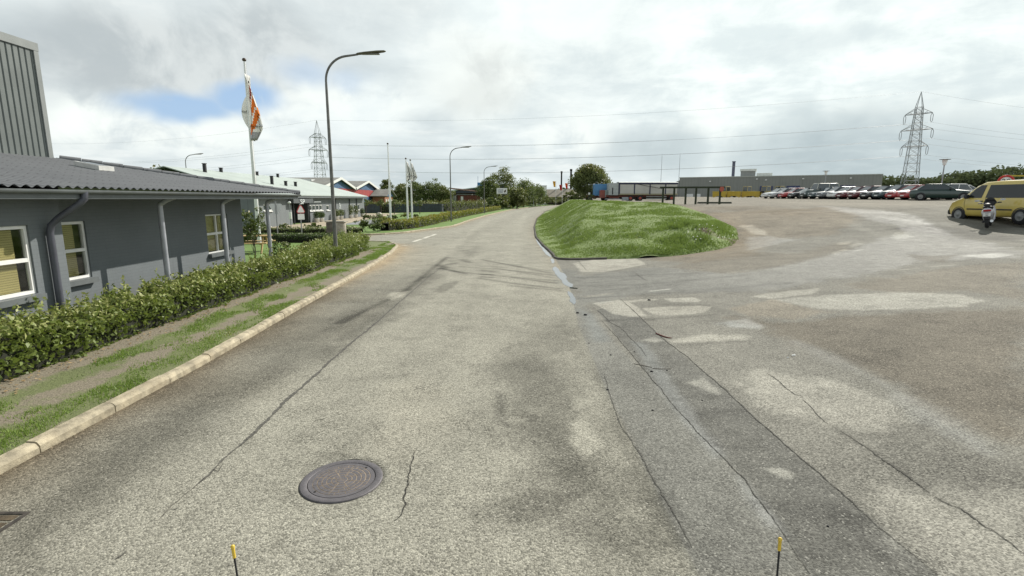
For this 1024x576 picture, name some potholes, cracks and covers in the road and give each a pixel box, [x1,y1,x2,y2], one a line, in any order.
crack [397,449,417,519]
manhole cover [299,460,383,504]
drain grate [0,511,31,532]
